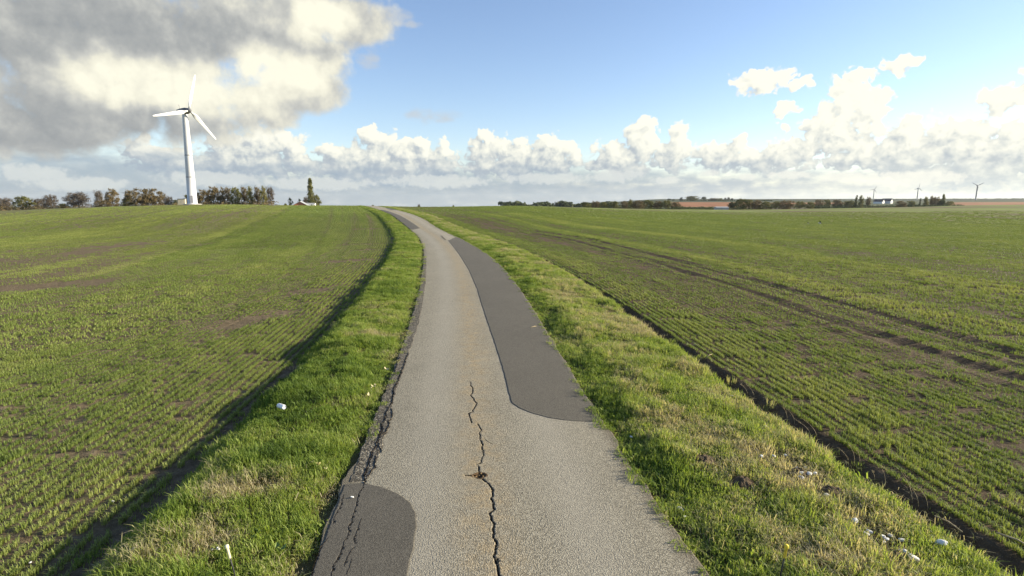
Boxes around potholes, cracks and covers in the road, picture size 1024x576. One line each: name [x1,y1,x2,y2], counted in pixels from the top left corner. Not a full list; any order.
crack [312,352,409,575]
crack [465,385,500,576]
